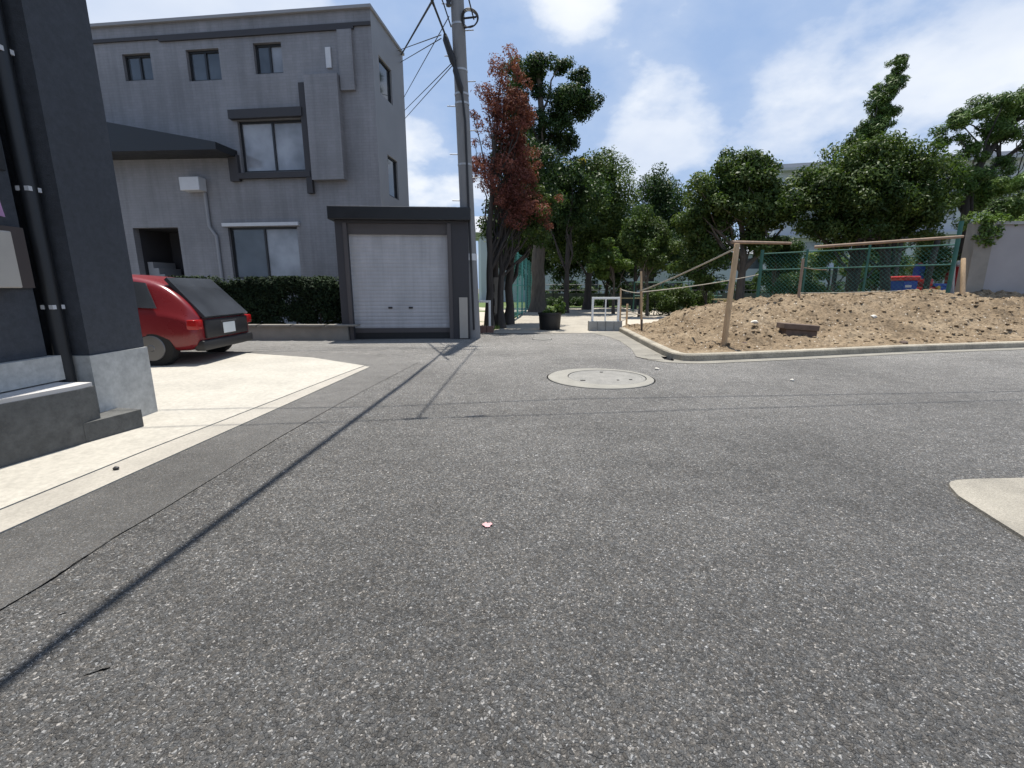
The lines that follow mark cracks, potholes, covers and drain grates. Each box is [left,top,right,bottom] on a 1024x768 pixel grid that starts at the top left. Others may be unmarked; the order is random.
manhole cover [547,368,655,389]
